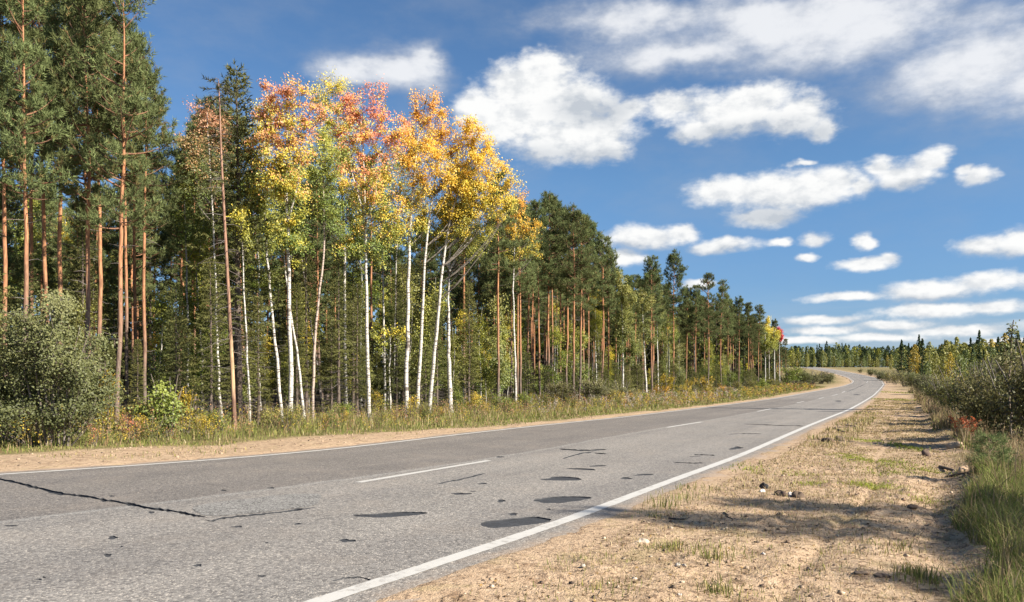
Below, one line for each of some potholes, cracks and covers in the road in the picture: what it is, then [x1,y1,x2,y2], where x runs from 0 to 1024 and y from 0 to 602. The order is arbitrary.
crack [0,478,314,522]
crack [561,449,607,459]
crack [438,473,485,484]
